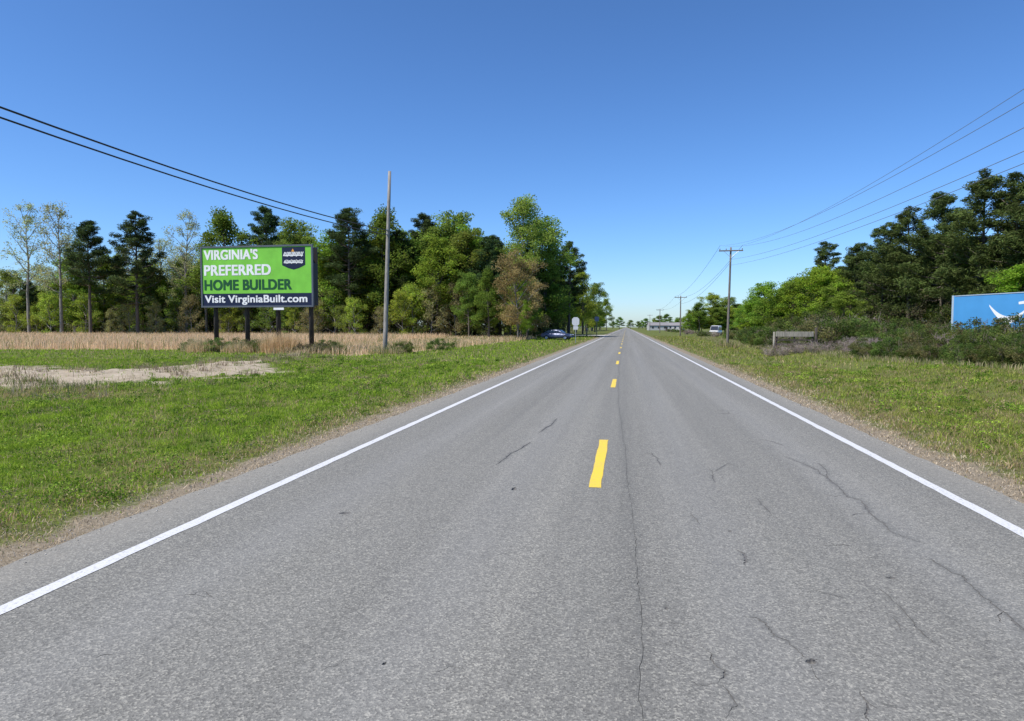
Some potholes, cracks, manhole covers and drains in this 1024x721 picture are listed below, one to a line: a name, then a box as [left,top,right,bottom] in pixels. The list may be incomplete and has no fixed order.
crack [926,559,1024,631]
crack [690,647,738,720]
crack [766,440,918,542]
crack [746,616,820,682]
crack [860,693,875,721]
crack [876,586,940,646]
